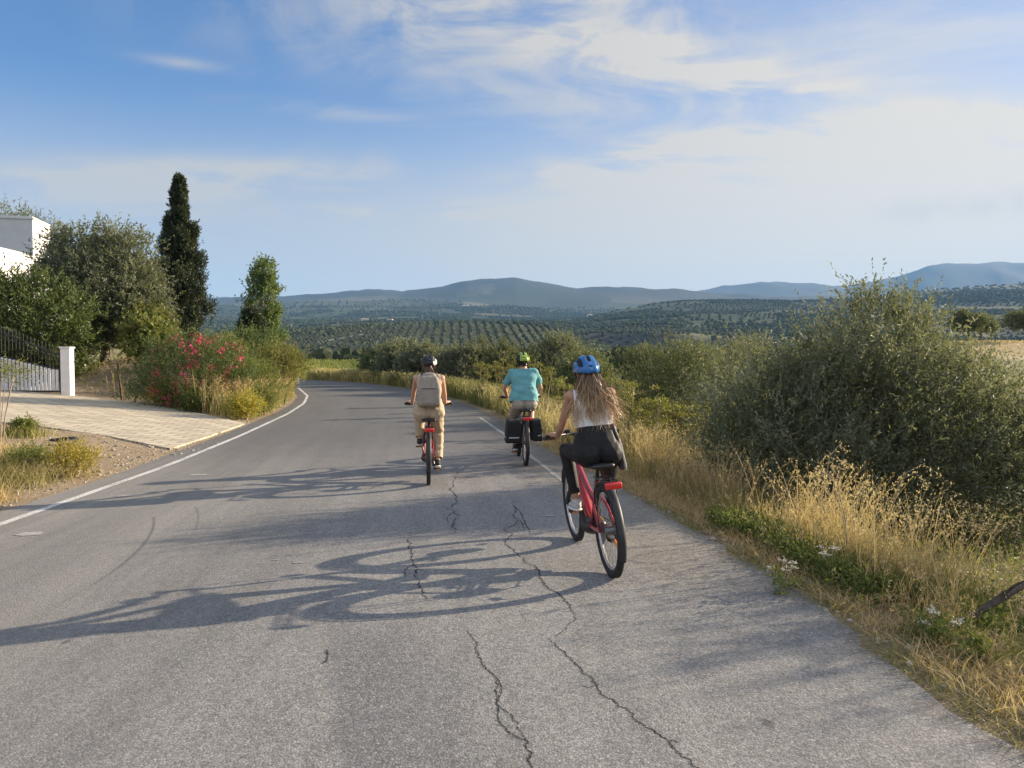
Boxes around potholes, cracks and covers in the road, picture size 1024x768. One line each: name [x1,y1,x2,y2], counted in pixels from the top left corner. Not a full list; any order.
crack [467,630,534,768]
crack [404,536,428,601]
crack [503,500,699,768]
crack [447,471,460,532]
